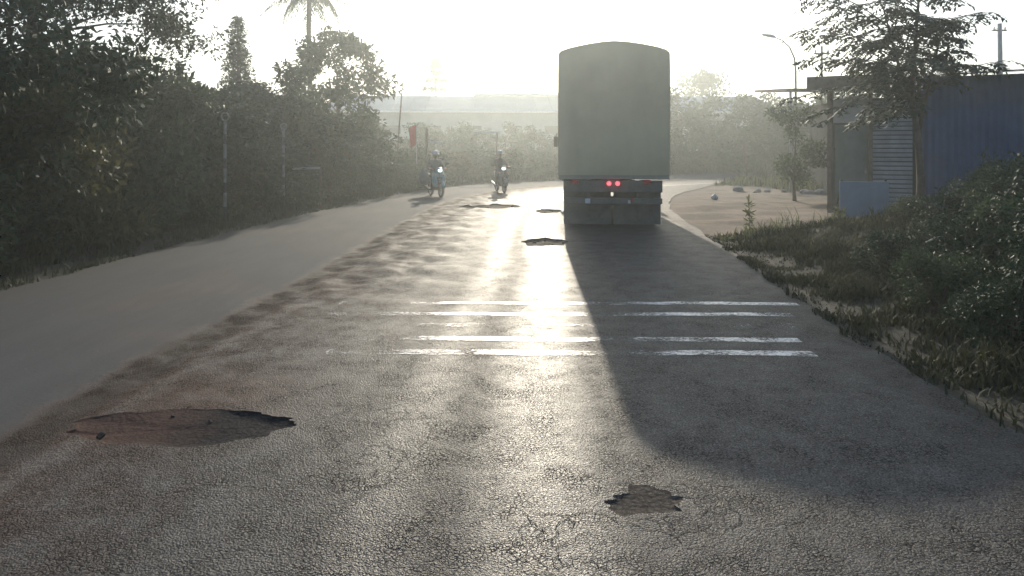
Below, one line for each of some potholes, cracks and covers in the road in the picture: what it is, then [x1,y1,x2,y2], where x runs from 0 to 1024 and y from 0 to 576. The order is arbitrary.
pothole [521,237,568,246]
pothole [604,484,683,517]
pothole [66,409,296,447]
crack [486,482,754,576]
